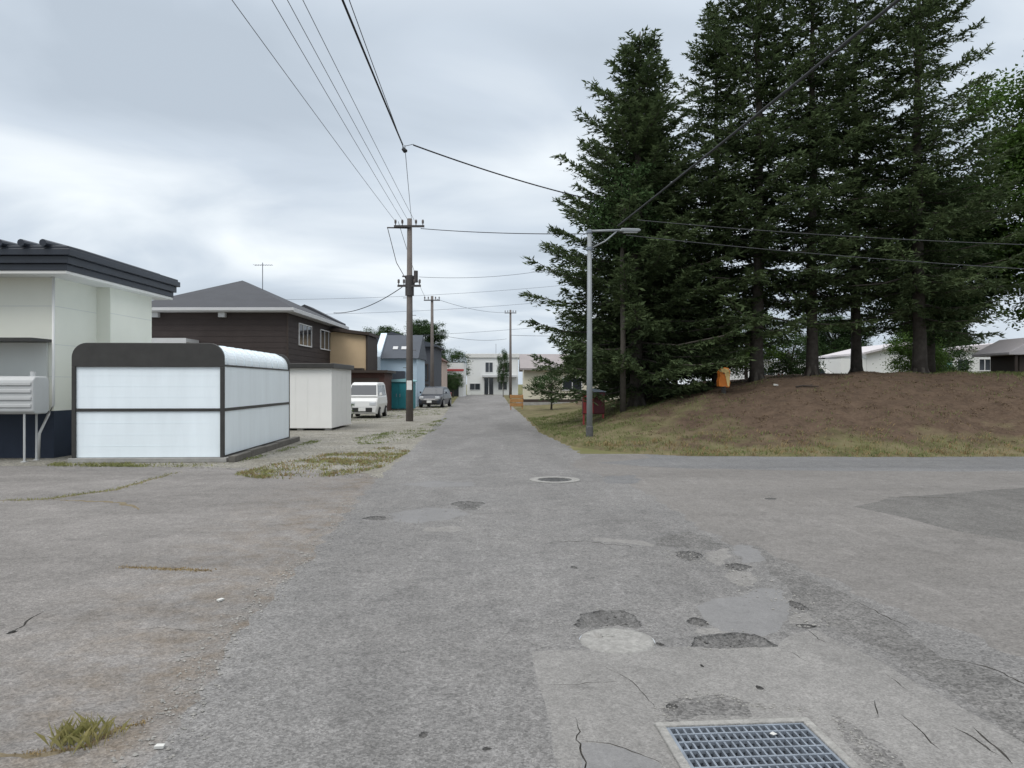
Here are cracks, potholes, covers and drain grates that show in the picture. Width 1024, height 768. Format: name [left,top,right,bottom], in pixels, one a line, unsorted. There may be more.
pothole [690,632,778,649]
drain grate [654,717,861,768]
pothole [686,617,709,626]
pothole [725,563,752,571]
crack [0,472,178,510]
crack [954,727,1012,763]
pothole [676,551,703,561]
pothole [573,610,642,629]
pothole [451,501,485,510]
